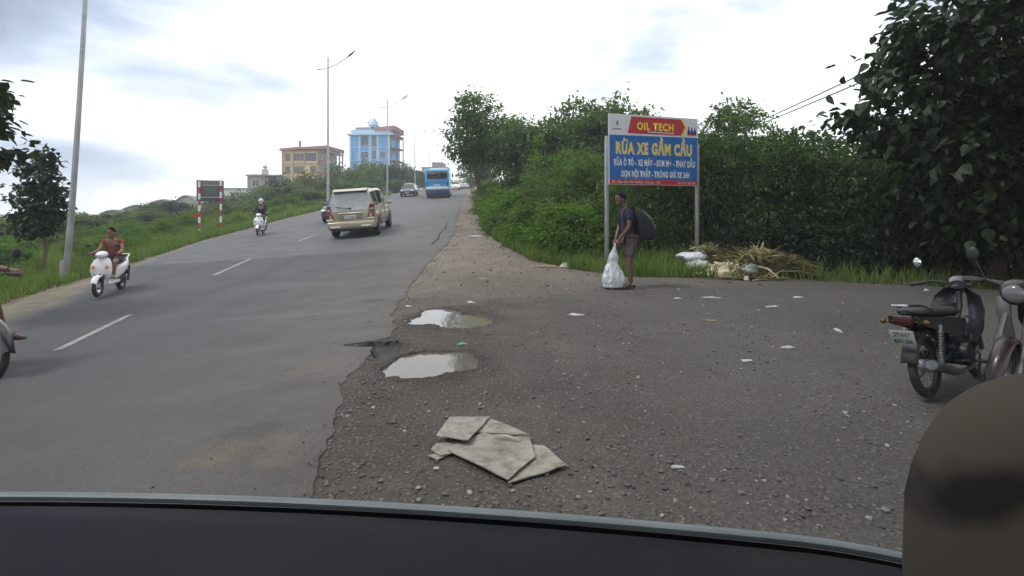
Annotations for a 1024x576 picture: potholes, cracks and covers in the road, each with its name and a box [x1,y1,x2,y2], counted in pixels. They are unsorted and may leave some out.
pothole [399,306,501,330]
pothole [348,340,408,363]
pothole [370,349,486,383]
